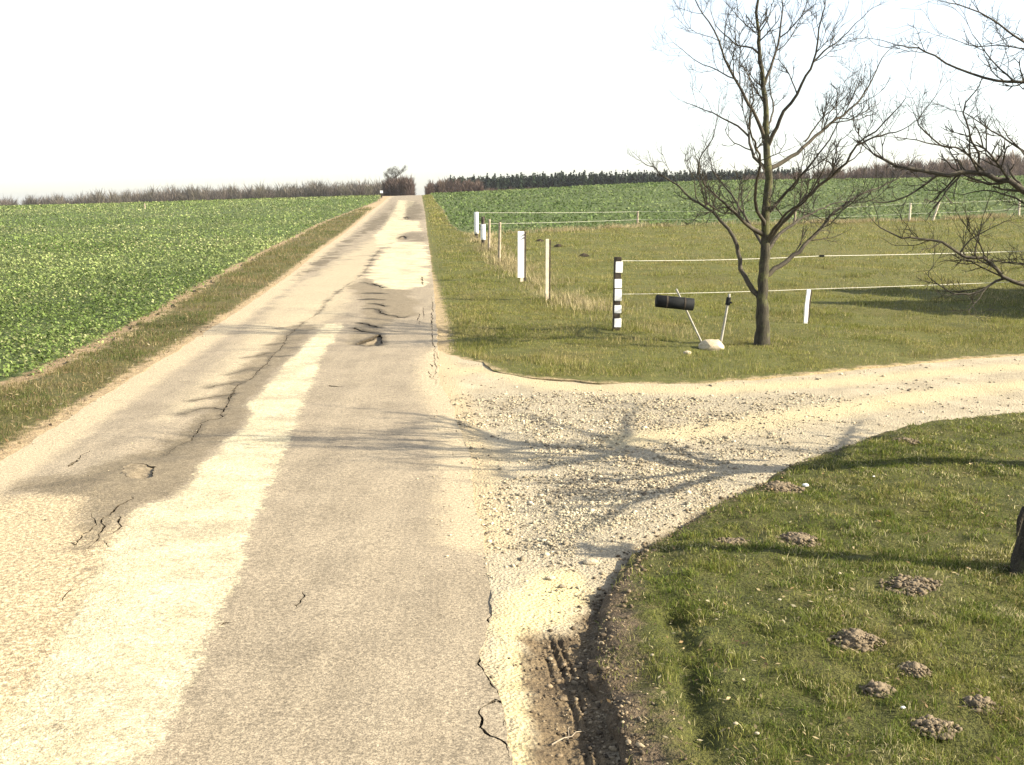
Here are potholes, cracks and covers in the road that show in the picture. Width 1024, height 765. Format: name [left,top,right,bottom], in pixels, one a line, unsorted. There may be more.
pothole [356,334,382,346]
crack [167,255,399,455]
crack [60,497,133,551]
pothole [121,463,155,479]
crack [477,659,508,749]
